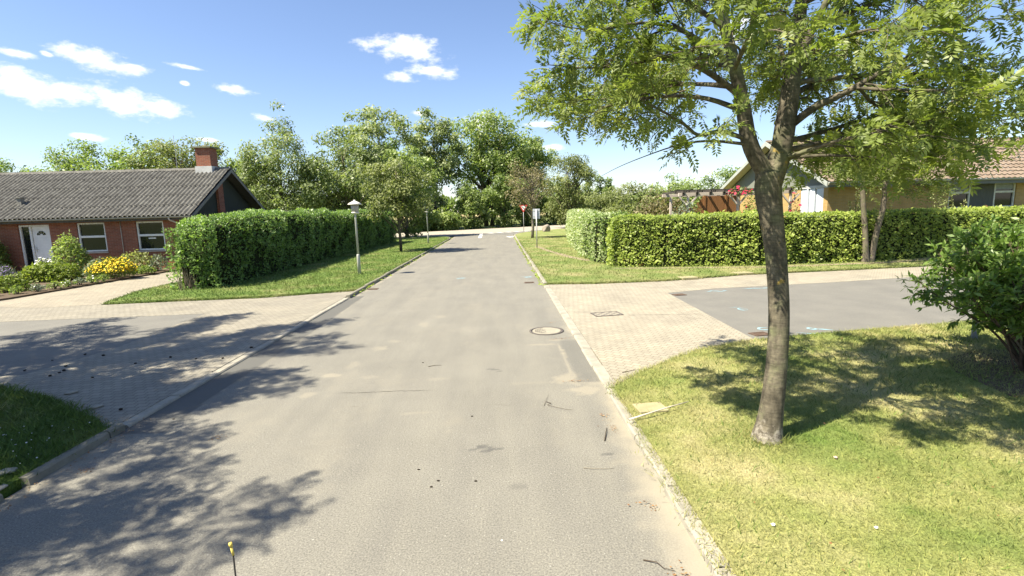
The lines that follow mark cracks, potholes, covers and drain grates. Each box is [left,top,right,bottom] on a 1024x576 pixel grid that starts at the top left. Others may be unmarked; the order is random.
manhole cover [529,327,564,335]
